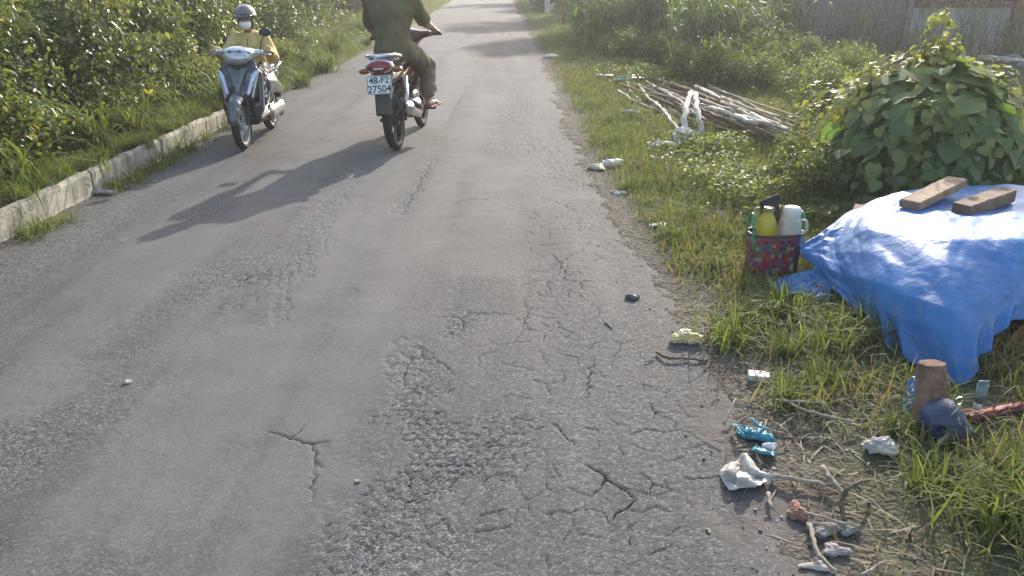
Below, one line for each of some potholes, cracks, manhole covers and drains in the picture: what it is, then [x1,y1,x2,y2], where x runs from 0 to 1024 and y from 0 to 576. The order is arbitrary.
crack [279,429,329,498]
crack [442,202,650,399]
crack [316,348,691,576]
crack [599,386,738,504]
